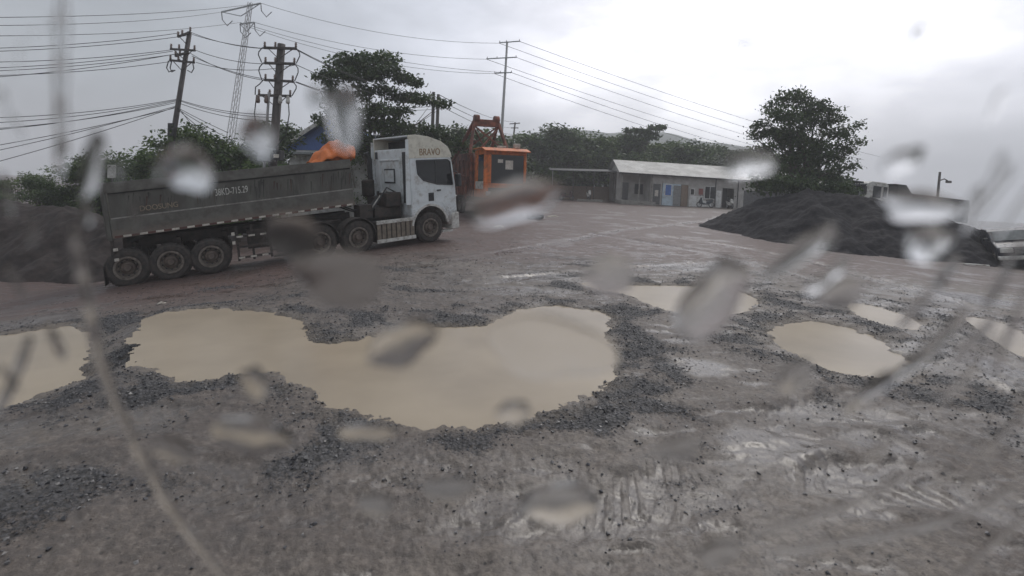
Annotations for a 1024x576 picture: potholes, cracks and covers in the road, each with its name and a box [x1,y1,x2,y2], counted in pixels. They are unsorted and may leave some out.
pothole [964,315,1024,359]
pothole [0,321,107,409]
pothole [124,302,628,438]
pothole [844,303,933,333]
pothole [753,314,936,383]
pothole [575,278,770,317]
